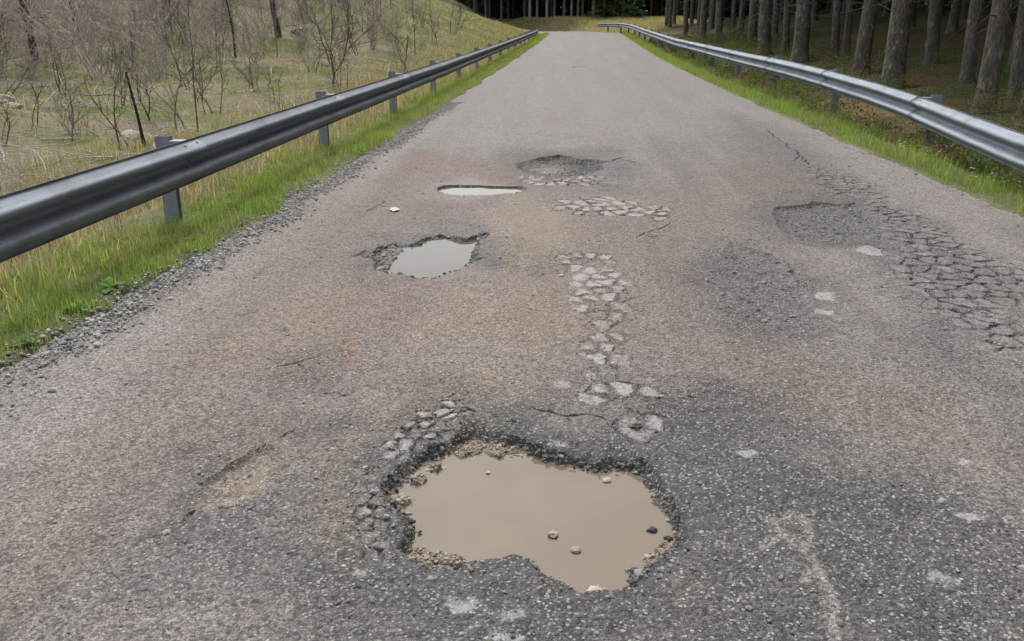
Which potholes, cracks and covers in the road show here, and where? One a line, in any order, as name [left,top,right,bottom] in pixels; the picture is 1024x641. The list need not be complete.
crack [513,157,674,447]
pothole [365,232,489,279]
crack [342,399,477,563]
pothole [515,155,606,177]
crack [760,512,838,641]
pothole [381,430,687,594]
pothole [437,185,527,196]
pothole [772,201,886,242]
crack [767,129,1024,363]
